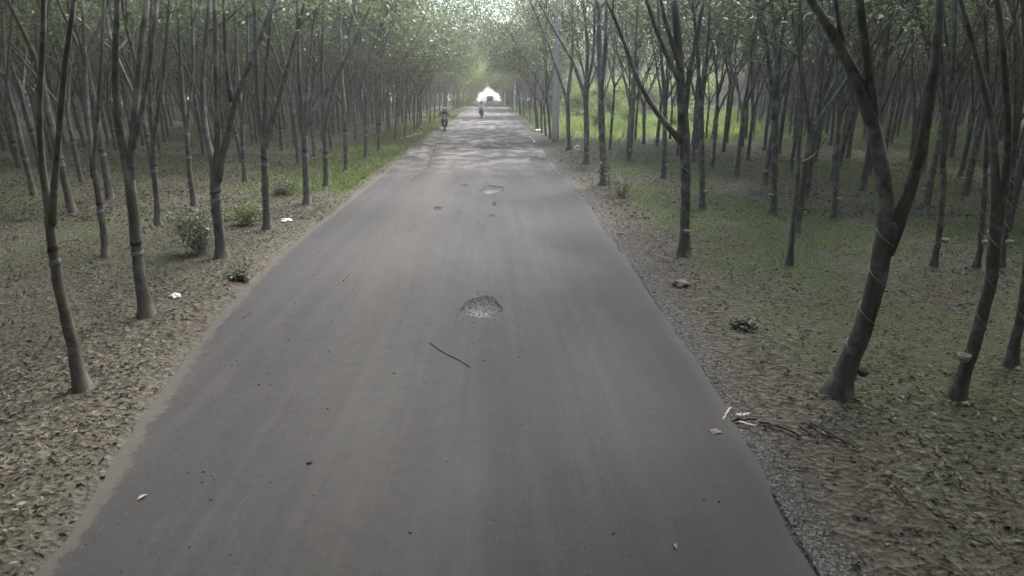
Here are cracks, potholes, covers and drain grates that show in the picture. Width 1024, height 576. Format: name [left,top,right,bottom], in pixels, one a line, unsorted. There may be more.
pothole [475,182,508,196]
pothole [452,290,510,323]
